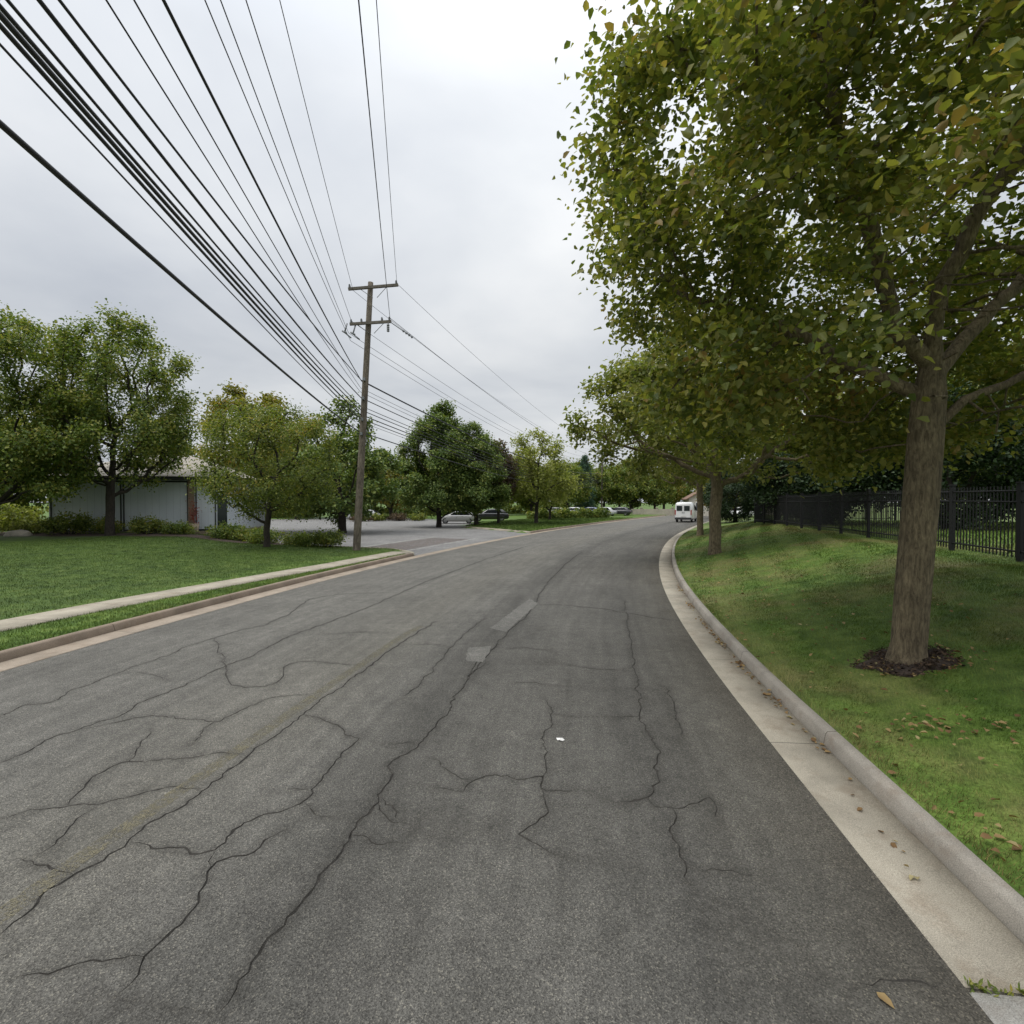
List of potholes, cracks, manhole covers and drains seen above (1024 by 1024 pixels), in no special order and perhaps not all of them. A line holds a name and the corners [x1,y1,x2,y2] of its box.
crack [0,546,718,1015]
